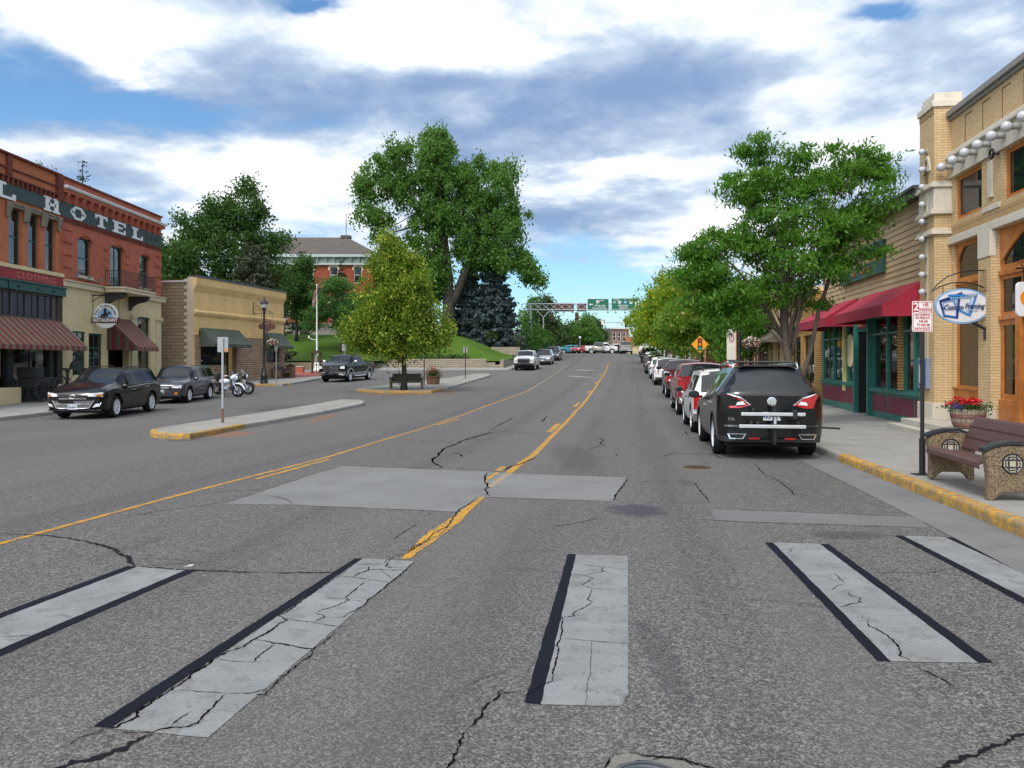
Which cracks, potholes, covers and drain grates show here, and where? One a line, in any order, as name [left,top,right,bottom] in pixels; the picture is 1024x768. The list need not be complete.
crack [529,563,633,703]
crack [387,418,528,471]
crack [779,536,981,696]
crack [936,733,1024,768]
crack [446,674,515,768]
